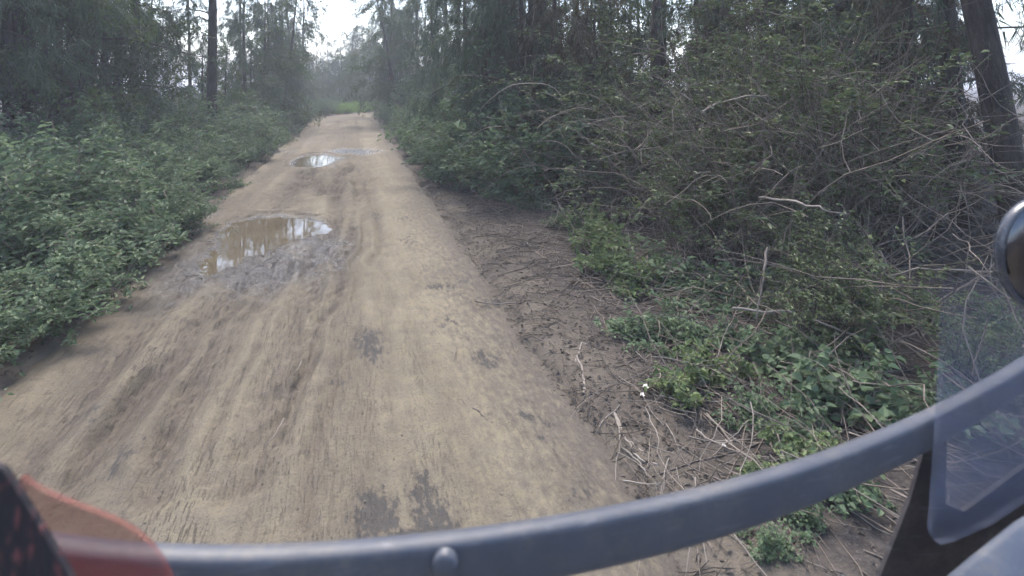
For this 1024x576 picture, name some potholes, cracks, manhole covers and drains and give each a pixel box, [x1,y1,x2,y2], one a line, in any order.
pothole [181,209,342,279]
pothole [285,151,349,168]
